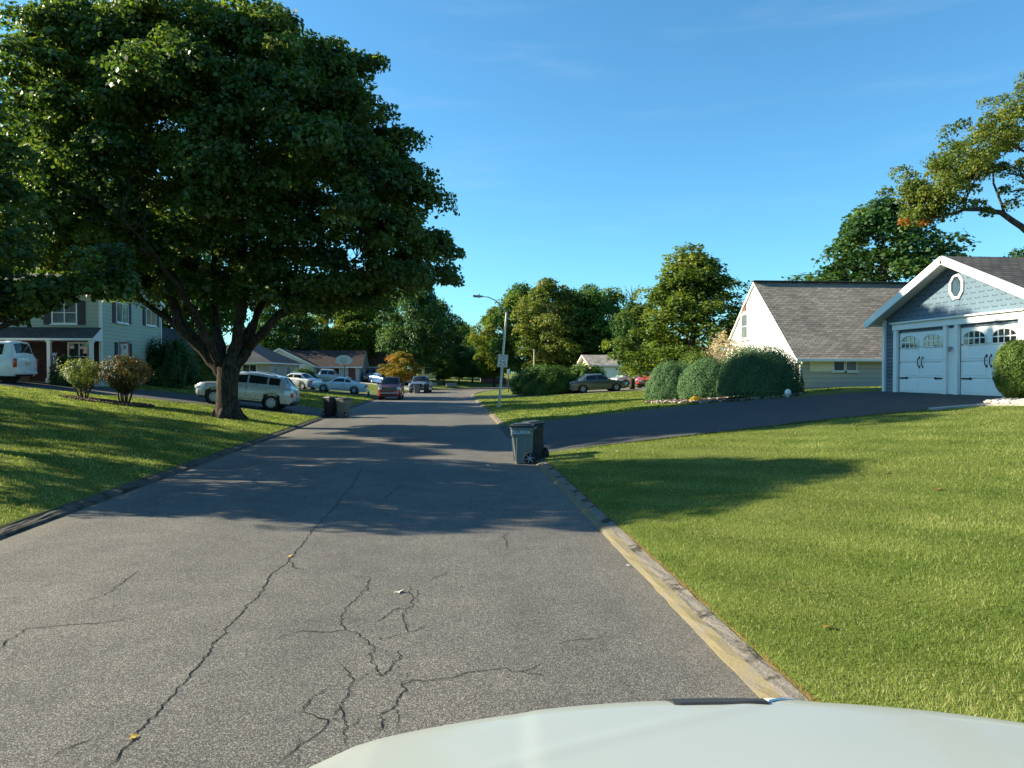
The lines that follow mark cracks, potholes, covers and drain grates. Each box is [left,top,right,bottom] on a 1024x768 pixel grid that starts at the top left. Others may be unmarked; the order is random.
crack [108,469,362,766]
crack [265,576,544,763]
